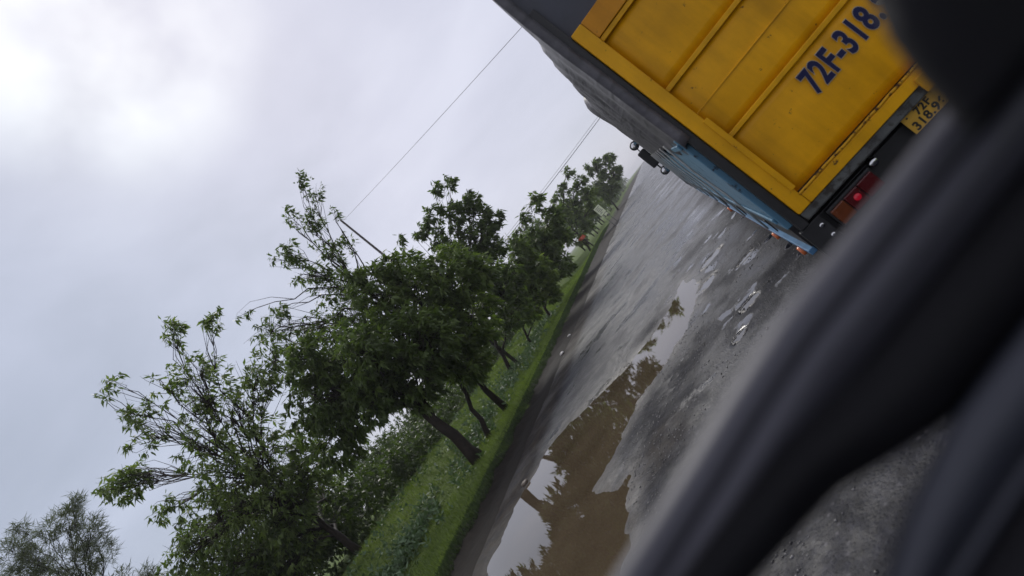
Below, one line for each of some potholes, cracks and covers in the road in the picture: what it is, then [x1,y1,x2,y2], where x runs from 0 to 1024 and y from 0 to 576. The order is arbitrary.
pothole [738,290,761,314]
pothole [731,327,748,345]
